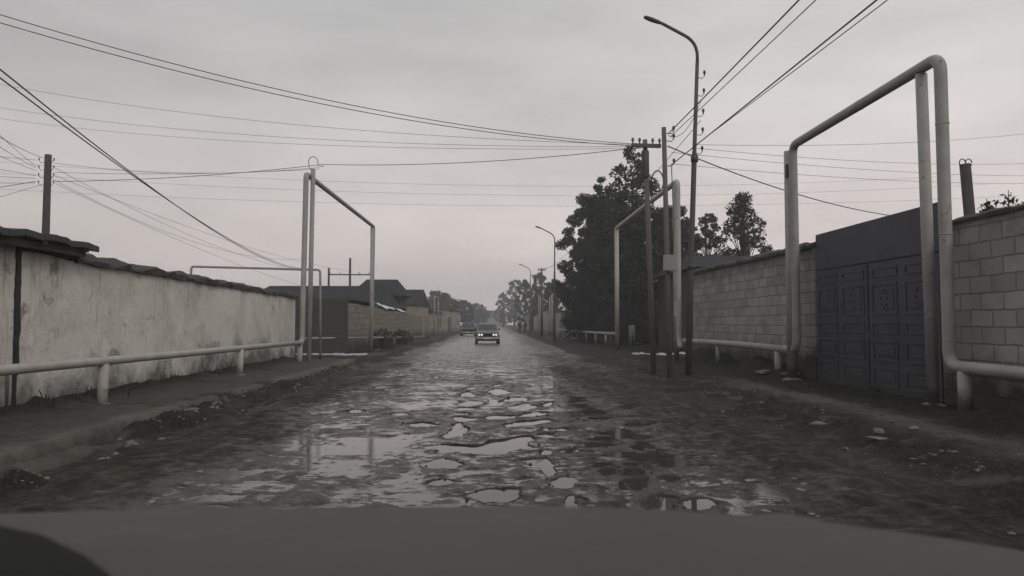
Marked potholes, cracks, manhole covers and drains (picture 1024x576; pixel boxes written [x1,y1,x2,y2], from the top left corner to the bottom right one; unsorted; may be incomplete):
pothole [418,435,540,455]
pothole [616,476,650,491]
pothole [564,494,584,507]
pothole [514,456,560,477]
pothole [438,422,471,439]
pothole [672,497,719,510]
pothole [419,457,467,470]
pothole [463,486,524,504]
pothole [546,474,580,489]
pothole [500,417,554,427]
